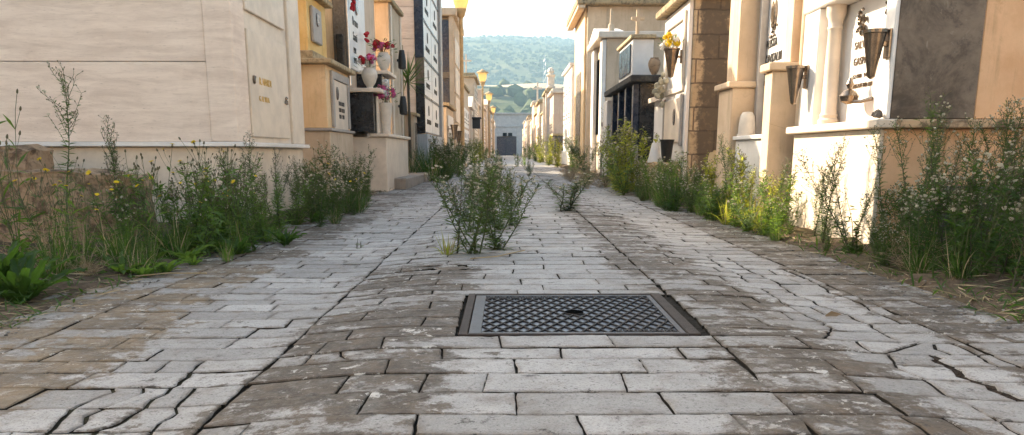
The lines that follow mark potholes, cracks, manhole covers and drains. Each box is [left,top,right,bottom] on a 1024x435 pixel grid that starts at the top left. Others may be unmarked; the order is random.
manhole cover [458,293,701,339]
